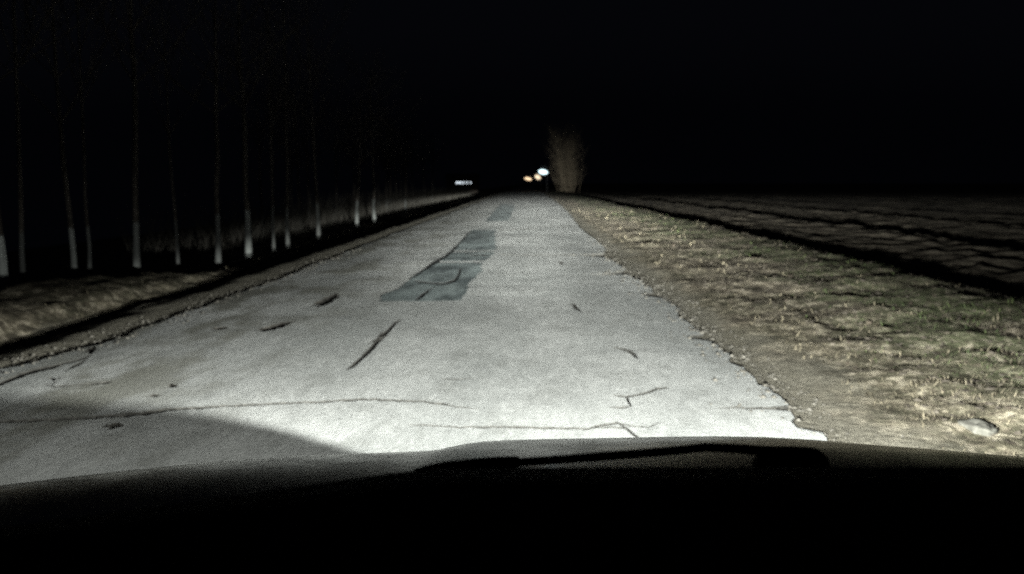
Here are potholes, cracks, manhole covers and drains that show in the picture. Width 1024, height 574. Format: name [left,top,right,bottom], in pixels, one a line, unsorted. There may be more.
crack [0,355,669,437]
crack [613,347,638,359]
crack [346,319,402,370]
